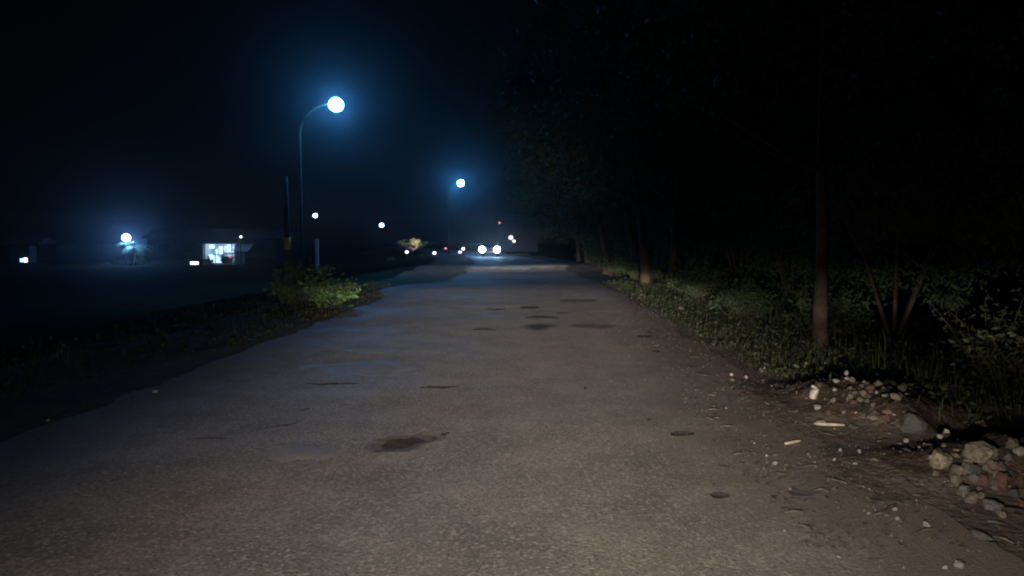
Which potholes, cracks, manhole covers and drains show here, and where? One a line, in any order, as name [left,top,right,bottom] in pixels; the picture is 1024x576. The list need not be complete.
pothole [519,323,558,331]
pothole [364,430,447,453]
